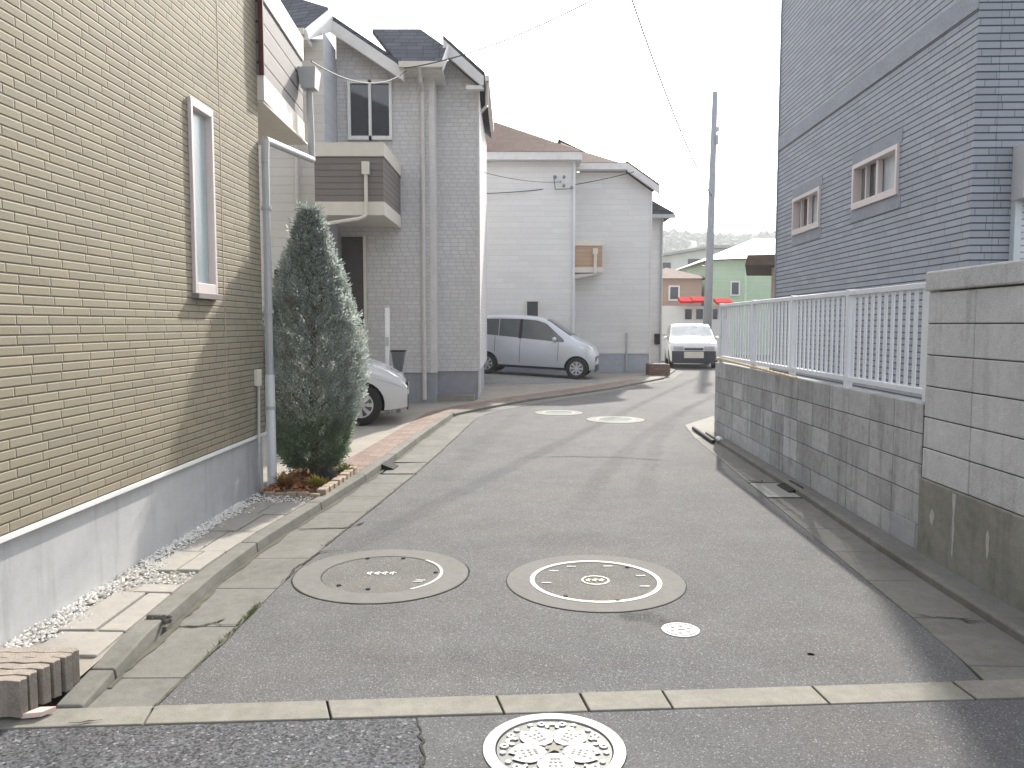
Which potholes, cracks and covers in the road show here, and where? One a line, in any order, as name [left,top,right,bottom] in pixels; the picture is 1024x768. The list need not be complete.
crack [417,716,426,768]
manhole cover [291,549,469,605]
manhole cover [483,713,626,768]
manhole cover [506,555,687,613]
utility cover [662,622,700,638]
